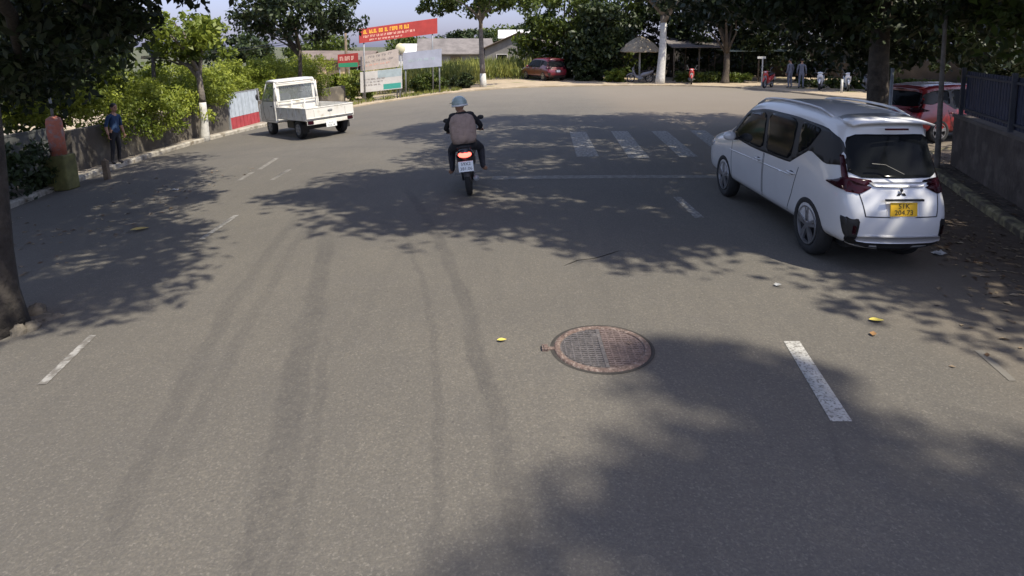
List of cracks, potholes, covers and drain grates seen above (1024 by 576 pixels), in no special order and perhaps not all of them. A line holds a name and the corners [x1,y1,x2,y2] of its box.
manhole cover [542,325,655,374]
